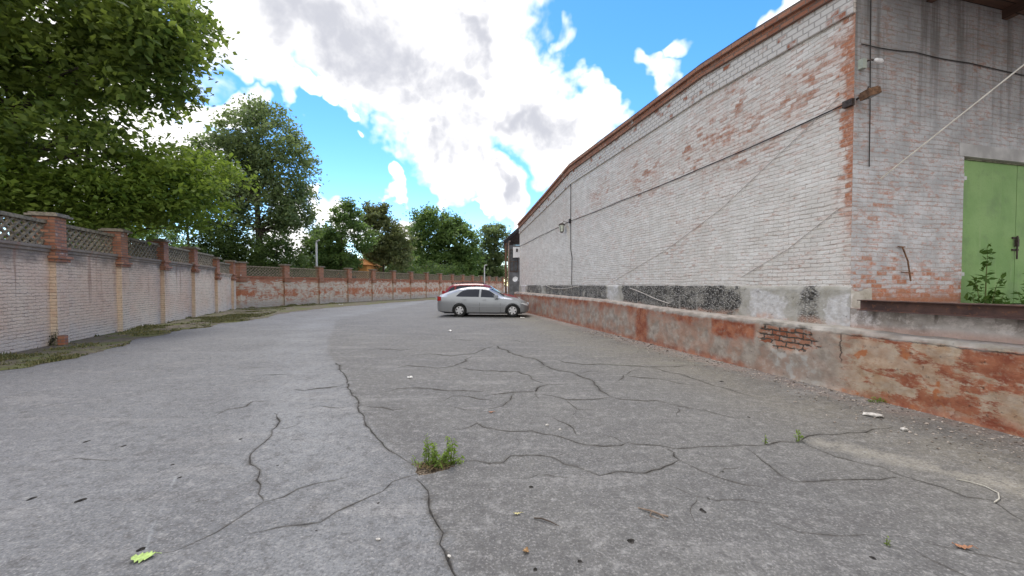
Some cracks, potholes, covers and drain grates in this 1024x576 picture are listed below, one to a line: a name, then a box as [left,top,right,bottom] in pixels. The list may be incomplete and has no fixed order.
crack [153,339,1024,555]
